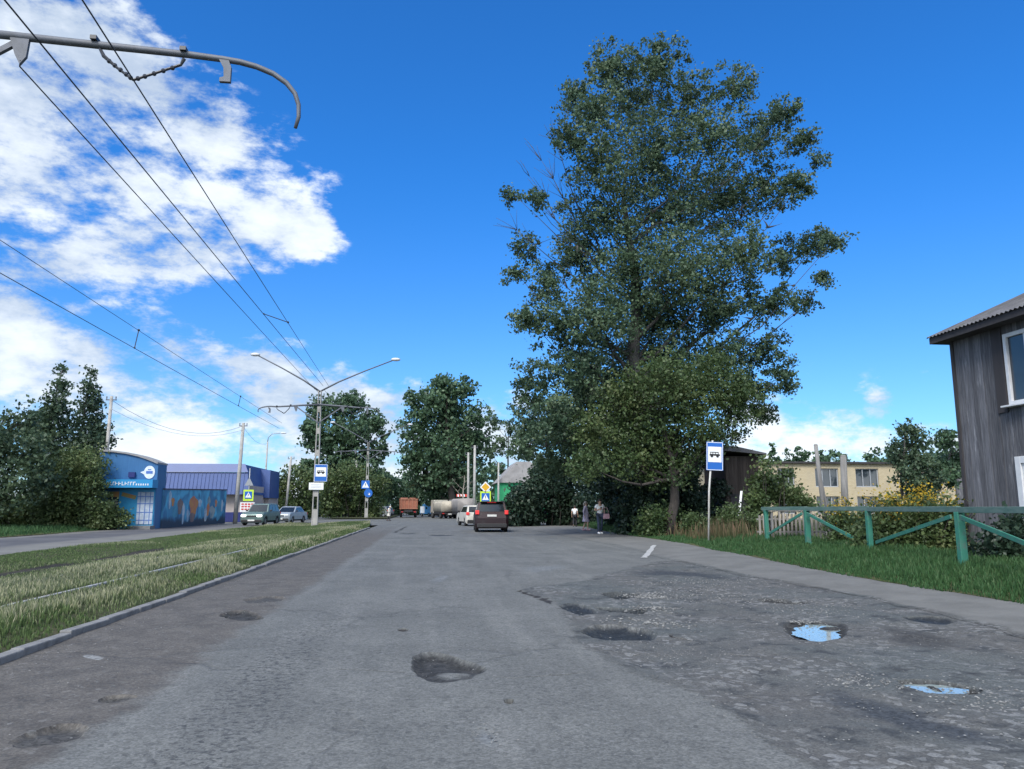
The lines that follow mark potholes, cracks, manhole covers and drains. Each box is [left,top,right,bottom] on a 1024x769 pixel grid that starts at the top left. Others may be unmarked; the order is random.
pothole [896,679,984,695]
pothole [219,610,264,621]
pothole [902,616,958,625]
pothole [580,624,658,641]
pothole [559,603,598,615]
pothole [98,694,138,703]
pothole [8,723,90,748]
pothole [410,652,487,683]
pothole [782,621,850,641]
